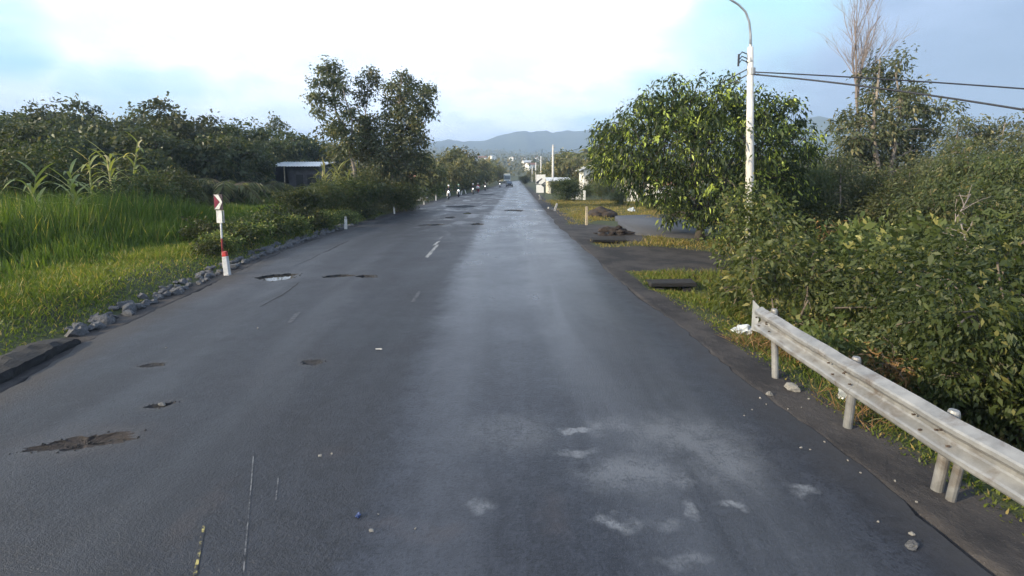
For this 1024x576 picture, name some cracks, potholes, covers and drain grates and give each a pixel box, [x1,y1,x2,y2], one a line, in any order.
pothole [255,273,302,282]
pothole [9,429,150,455]
